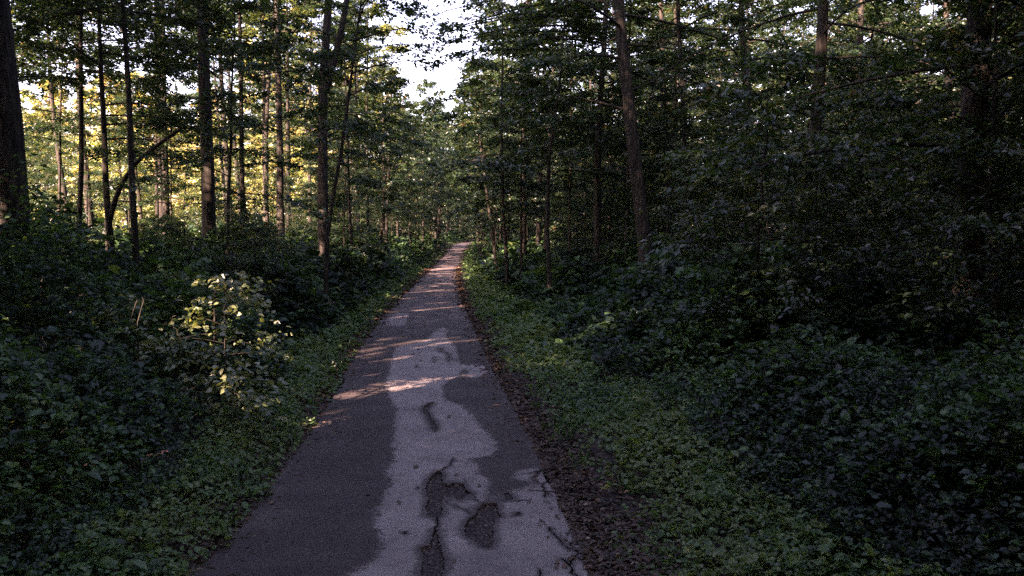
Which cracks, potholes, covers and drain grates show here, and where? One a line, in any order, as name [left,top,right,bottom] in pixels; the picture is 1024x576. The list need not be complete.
pothole [425,470,472,517]
pothole [422,402,437,431]
crack [548,527,582,576]
pothole [464,503,501,548]
pothole [420,530,445,576]
